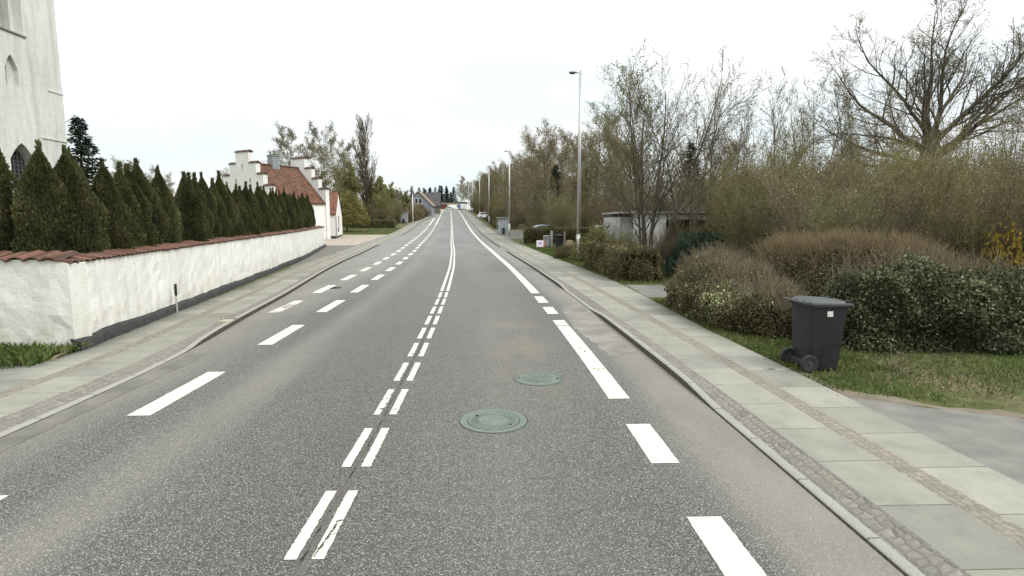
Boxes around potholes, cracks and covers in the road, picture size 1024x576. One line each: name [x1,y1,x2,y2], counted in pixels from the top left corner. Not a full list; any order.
manhole cover [459,409,528,433]
manhole cover [513,371,563,386]
